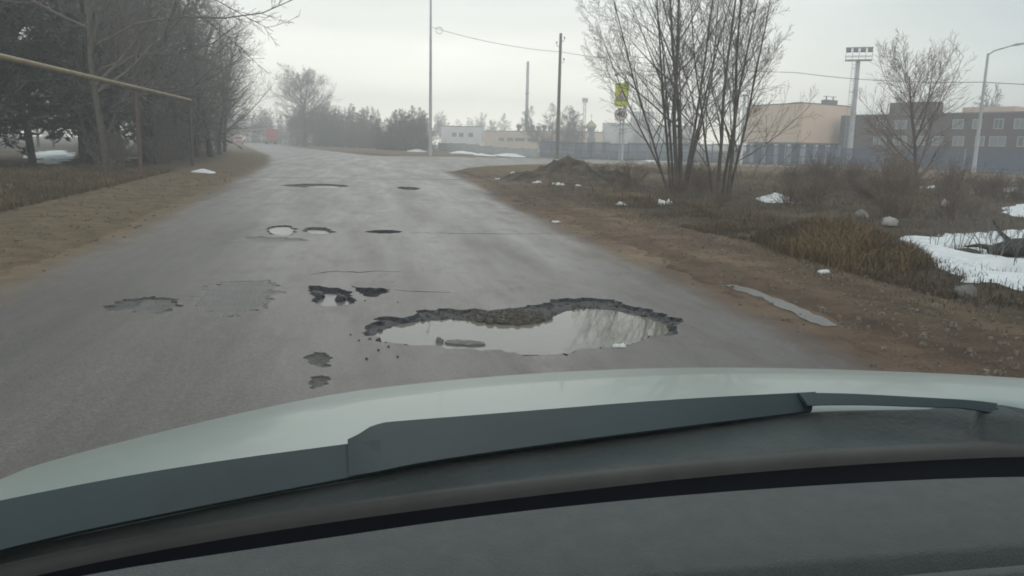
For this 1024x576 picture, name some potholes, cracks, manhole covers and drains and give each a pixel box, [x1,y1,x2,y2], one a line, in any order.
pothole [308,375,331,389]
pothole [363,297,683,356]
pothole [352,286,390,297]
pothole [103,296,184,315]
pothole [308,286,357,304]
pothole [303,352,333,368]
